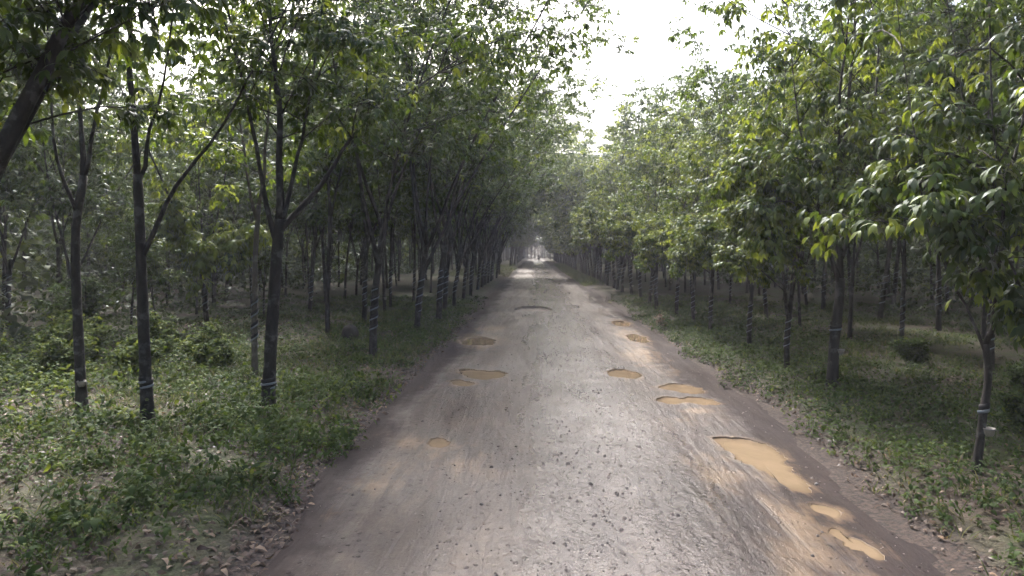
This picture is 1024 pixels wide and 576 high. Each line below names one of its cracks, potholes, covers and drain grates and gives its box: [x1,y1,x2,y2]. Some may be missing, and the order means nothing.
pothole [809,503,842,518]
pothole [607,369,642,379]
pothole [828,528,885,560]
pothole [655,396,721,405]
pothole [427,437,451,448]
pothole [711,436,812,493]
pothole [658,383,705,394]
pothole [625,334,650,343]
pothole [458,336,497,346]
pothole [458,368,508,380]
